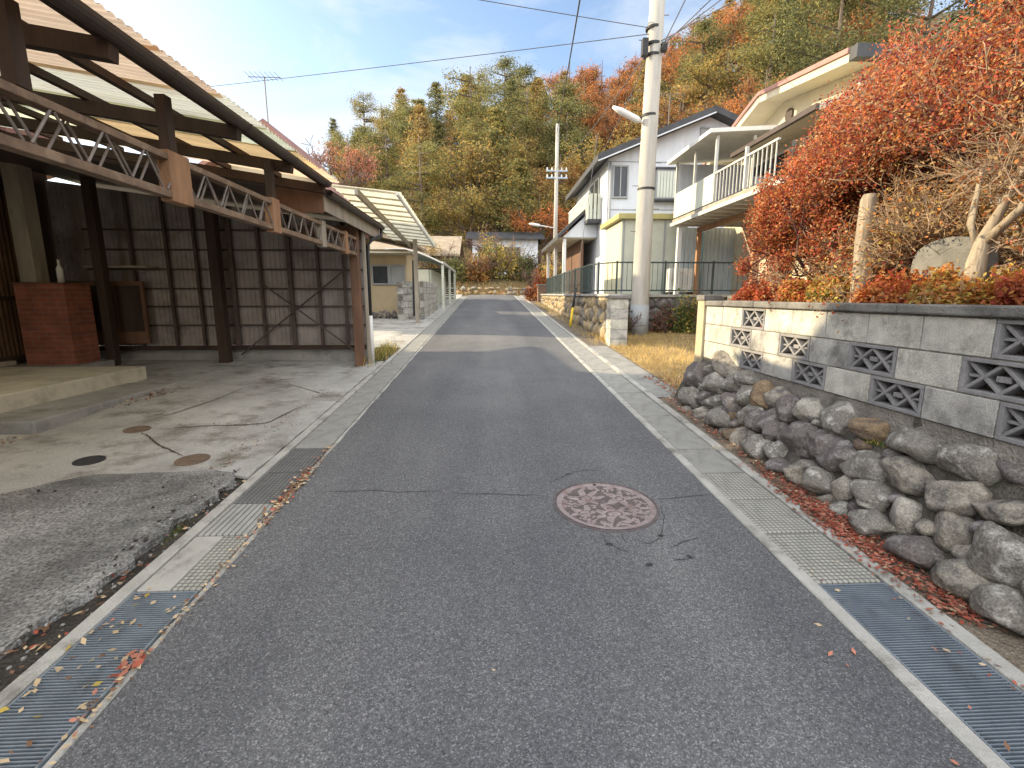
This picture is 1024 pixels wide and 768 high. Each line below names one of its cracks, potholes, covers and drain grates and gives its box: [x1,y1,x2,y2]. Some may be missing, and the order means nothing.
utility cover [72,455,106,466]
utility cover [174,453,211,466]
drain grate [819,583,1024,768]
crack [141,406,302,456]
drain grate [0,591,199,768]
crack [603,494,709,566]
crack [321,470,599,496]
manhole cover [553,482,660,532]
